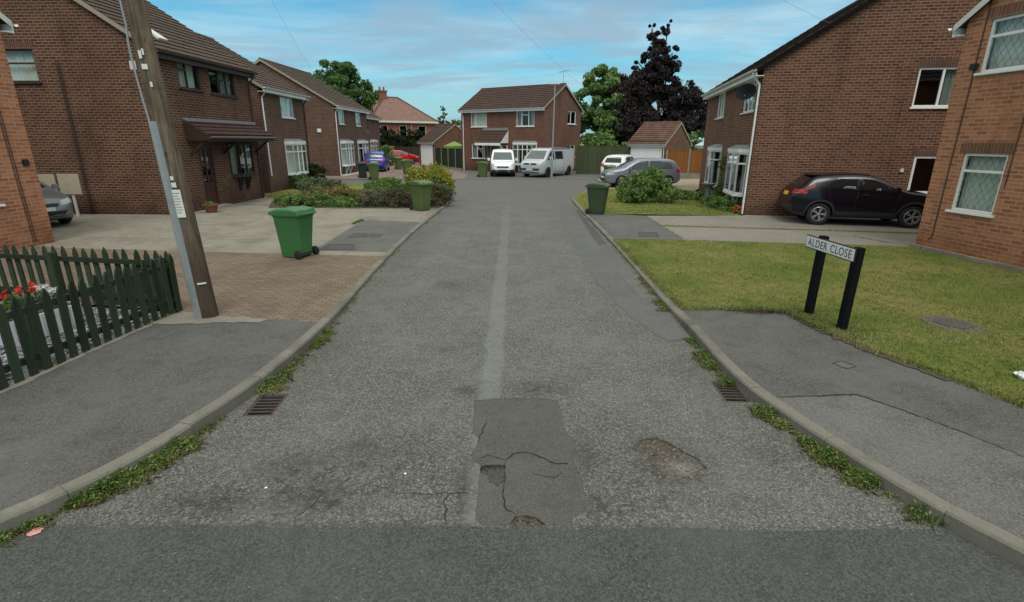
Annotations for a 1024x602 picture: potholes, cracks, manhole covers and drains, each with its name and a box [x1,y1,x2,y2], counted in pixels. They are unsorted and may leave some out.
utility cover [832,361,857,369]
crack [171,469,322,516]
pothole [480,465,506,486]
pothole [510,516,545,526]
crack [350,419,568,524]
utility cover [921,315,987,333]
pothole [631,437,706,480]
drain grate [243,395,288,416]
drain grate [712,383,750,402]
